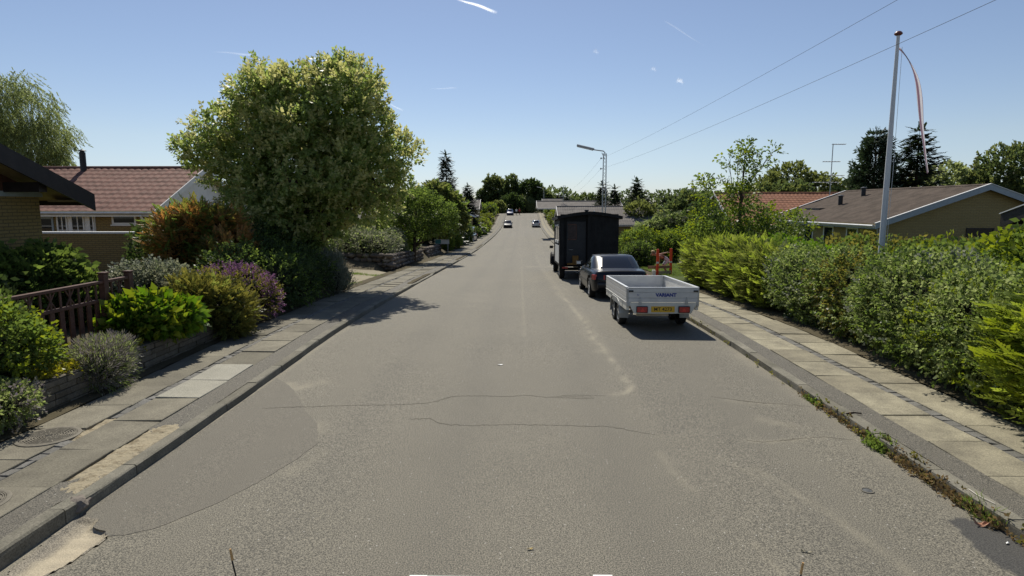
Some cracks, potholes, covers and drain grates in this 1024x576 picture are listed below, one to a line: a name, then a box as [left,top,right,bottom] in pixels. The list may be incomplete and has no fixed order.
crack [278,395,650,434]
manhole cover [0,489,13,506]
manhole cover [13,426,82,447]
